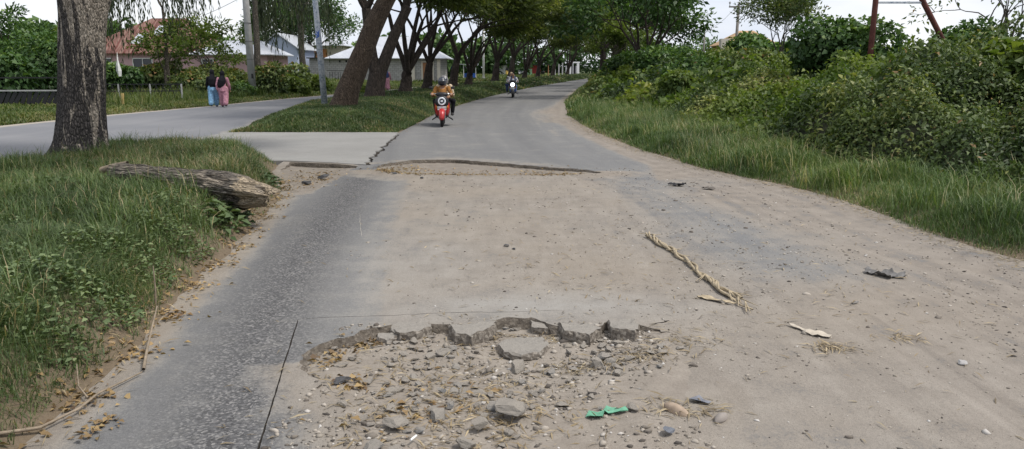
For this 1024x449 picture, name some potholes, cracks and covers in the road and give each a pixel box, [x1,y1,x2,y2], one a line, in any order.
crack [257,320,298,449]
pothole [300,317,693,449]
crack [366,135,399,165]
